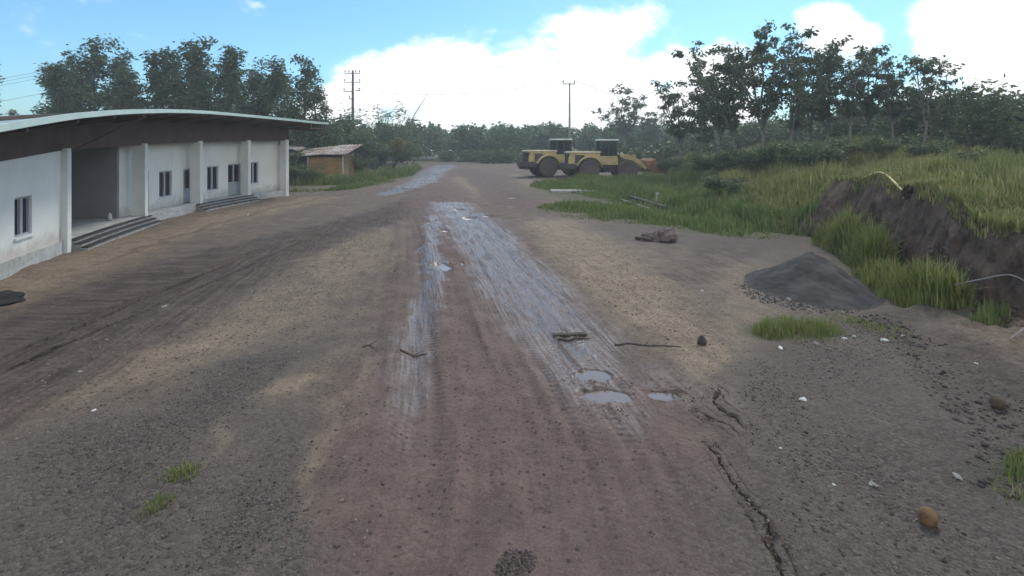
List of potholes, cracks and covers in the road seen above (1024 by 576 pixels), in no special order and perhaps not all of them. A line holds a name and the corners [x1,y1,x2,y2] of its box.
pothole [564,383,649,408]
crack [692,387,797,576]
pothole [566,366,620,384]
pothole [629,387,696,403]
